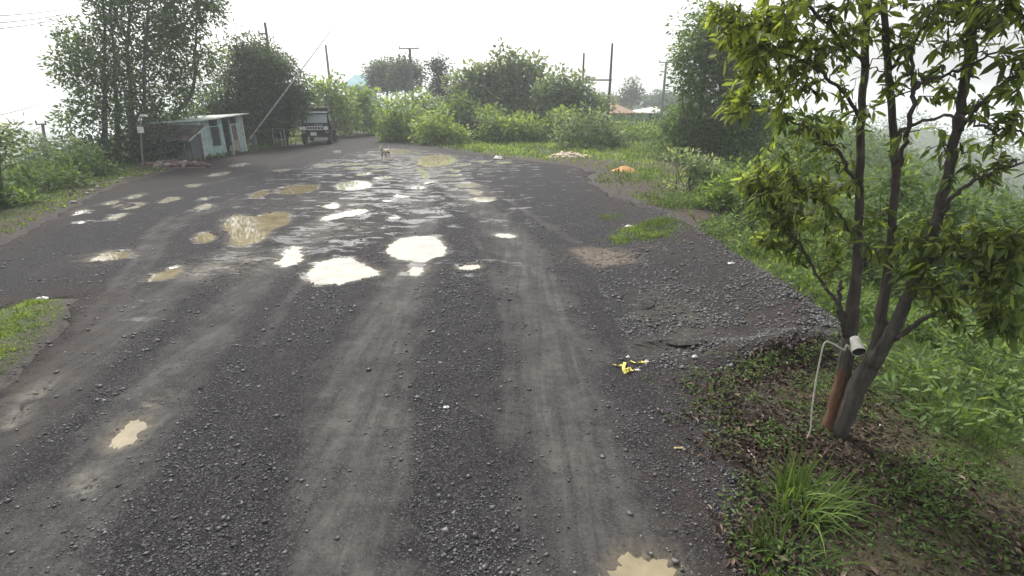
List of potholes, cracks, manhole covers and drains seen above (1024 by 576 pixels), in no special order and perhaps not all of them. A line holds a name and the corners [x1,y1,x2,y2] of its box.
pothole [262,244,315,270]
pothole [329,180,378,192]
pothole [209,210,300,250]
pothole [77,248,141,264]
pothole [185,230,228,245]
pothole [312,207,376,222]
pothole [293,254,393,289]
pothole [268,184,325,195]
pothole [133,265,192,284]
pothole [84,408,170,460]
pothole [576,530,710,576]
pothole [374,234,458,268]
